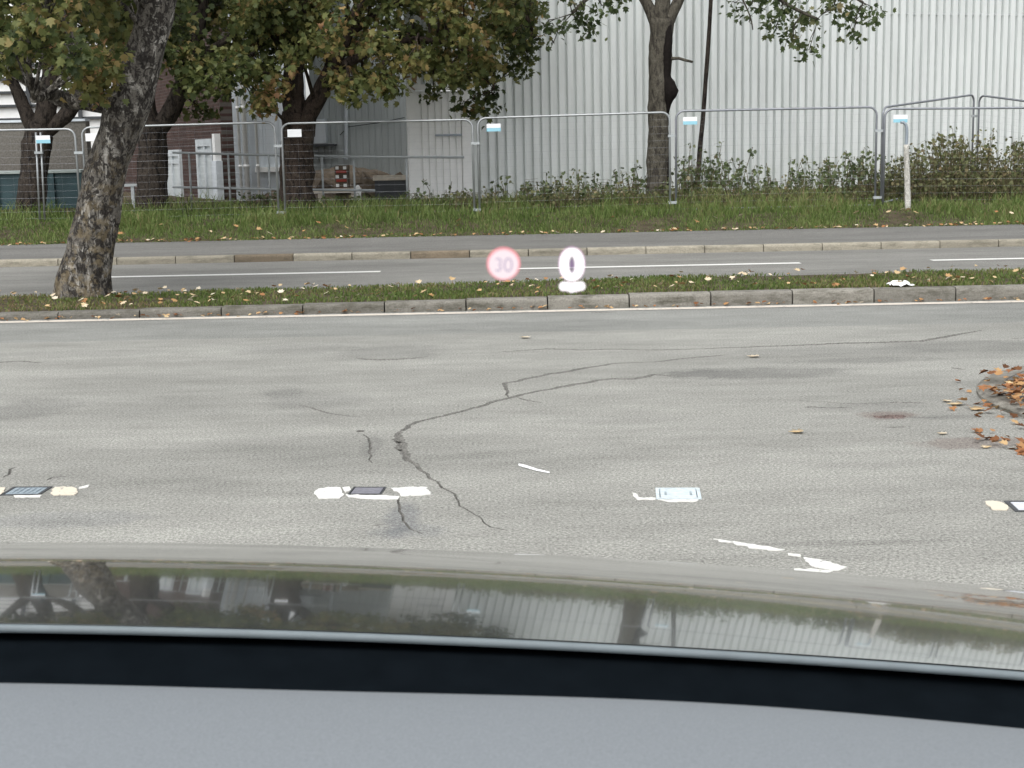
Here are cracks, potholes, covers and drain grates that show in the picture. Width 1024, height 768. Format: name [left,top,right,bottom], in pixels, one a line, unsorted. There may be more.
crack [357,330,982,534]
crack [298,405,357,417]
